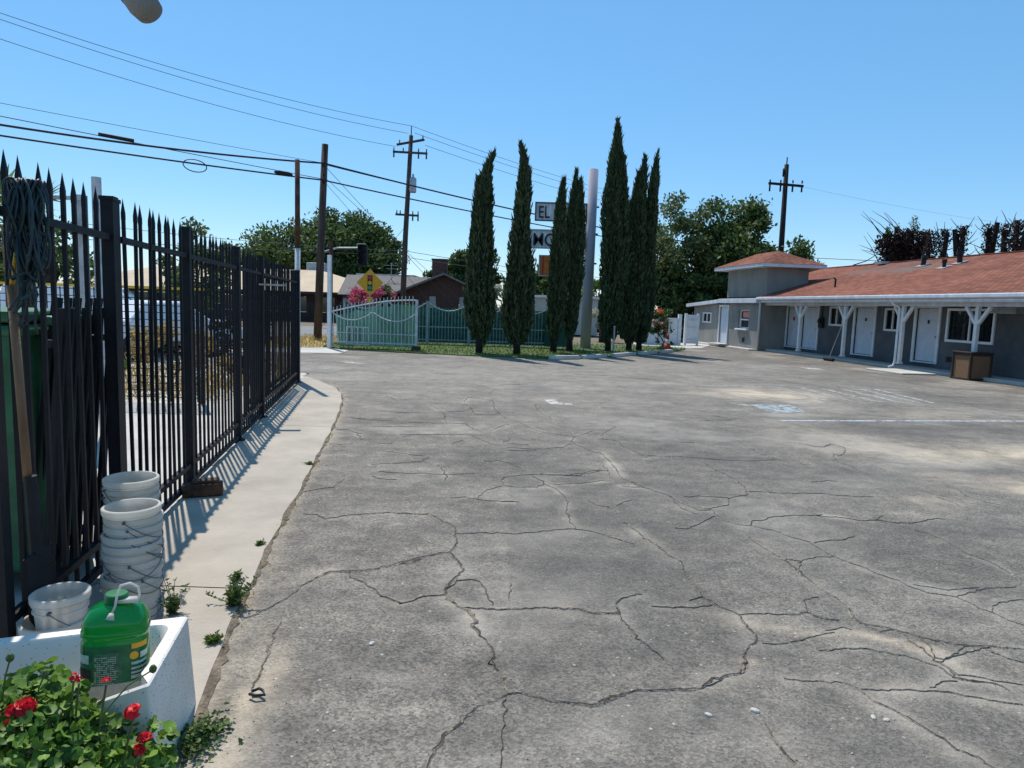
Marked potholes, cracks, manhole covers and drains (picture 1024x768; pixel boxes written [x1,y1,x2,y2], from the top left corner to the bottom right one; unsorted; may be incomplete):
crack [243,384,1024,768]
